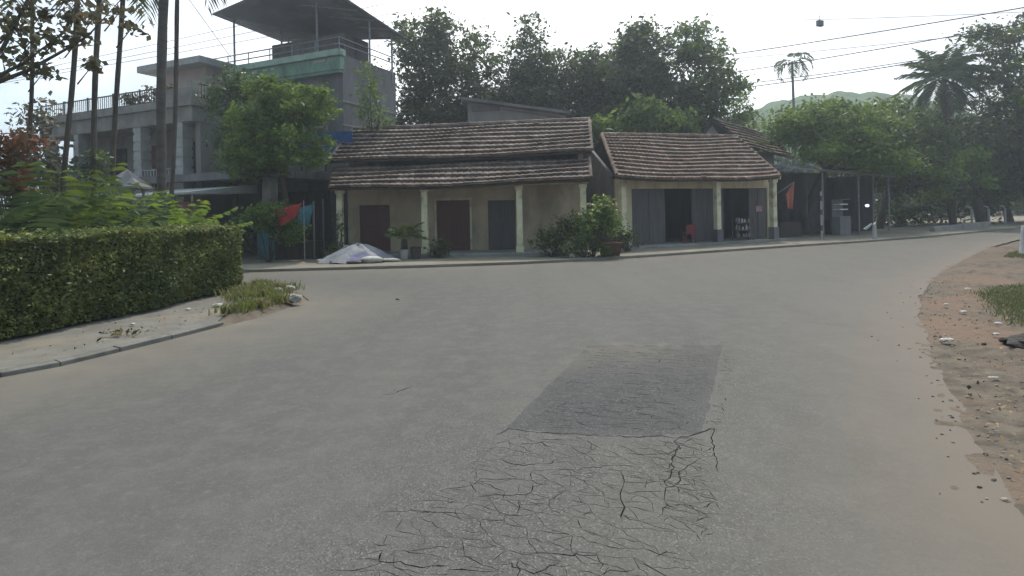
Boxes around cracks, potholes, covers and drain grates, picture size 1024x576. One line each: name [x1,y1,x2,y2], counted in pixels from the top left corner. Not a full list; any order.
crack [322,350,736,576]
